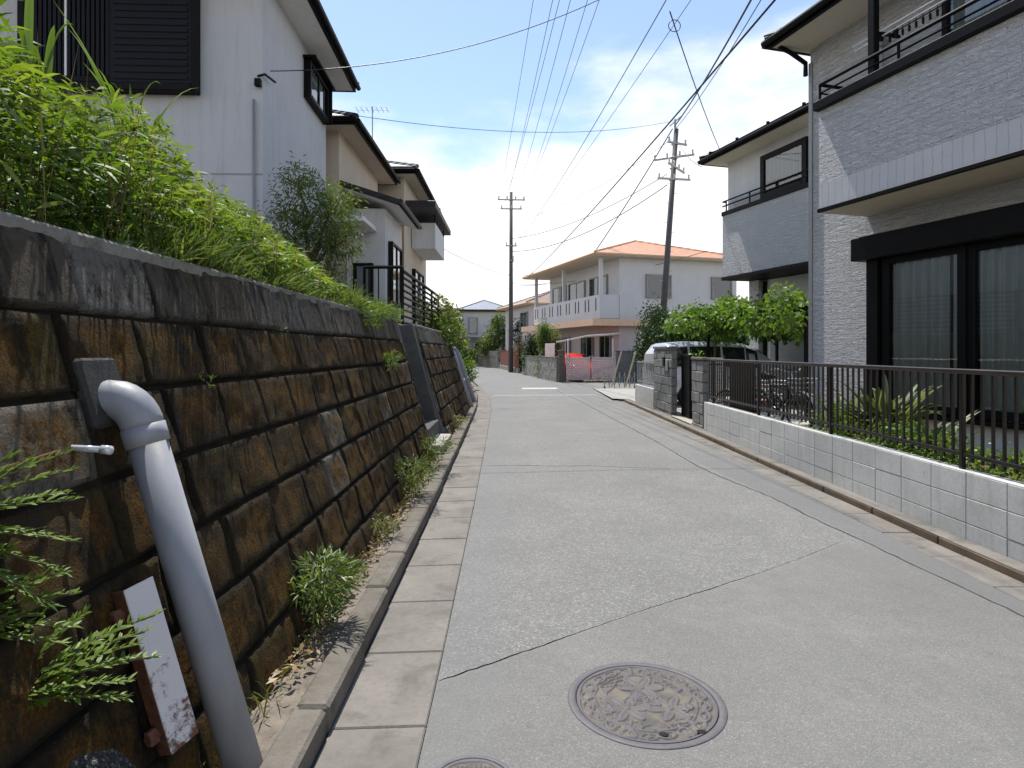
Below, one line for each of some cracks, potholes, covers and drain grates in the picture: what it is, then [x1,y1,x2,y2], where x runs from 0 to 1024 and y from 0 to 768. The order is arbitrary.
manhole cover [437,755,509,768]
manhole cover [568,662,728,750]
crack [440,542,840,681]
